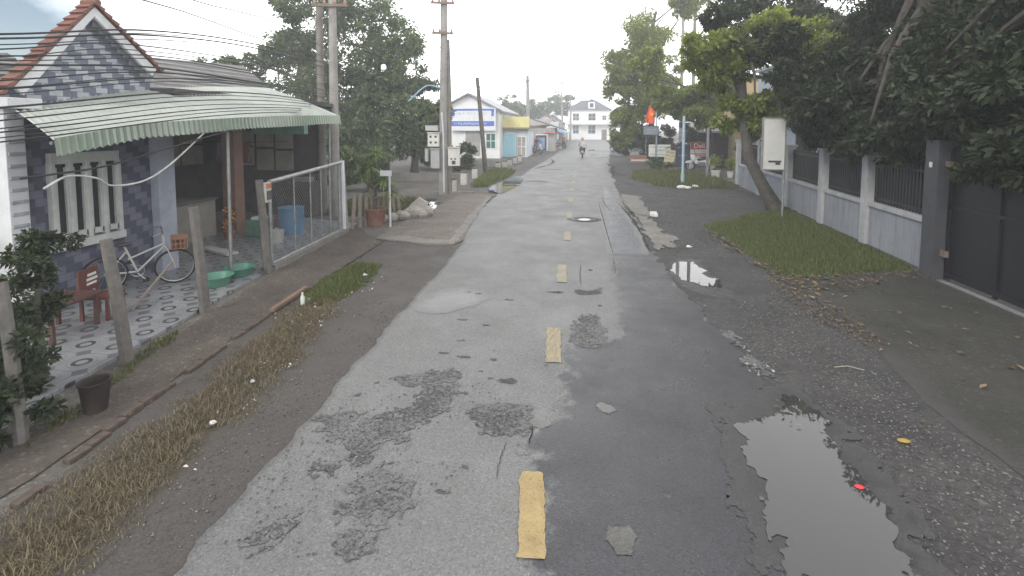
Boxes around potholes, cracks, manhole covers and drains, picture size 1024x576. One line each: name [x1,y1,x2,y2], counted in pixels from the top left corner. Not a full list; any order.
pothole [740,356,781,378]
pothole [719,329,743,347]
